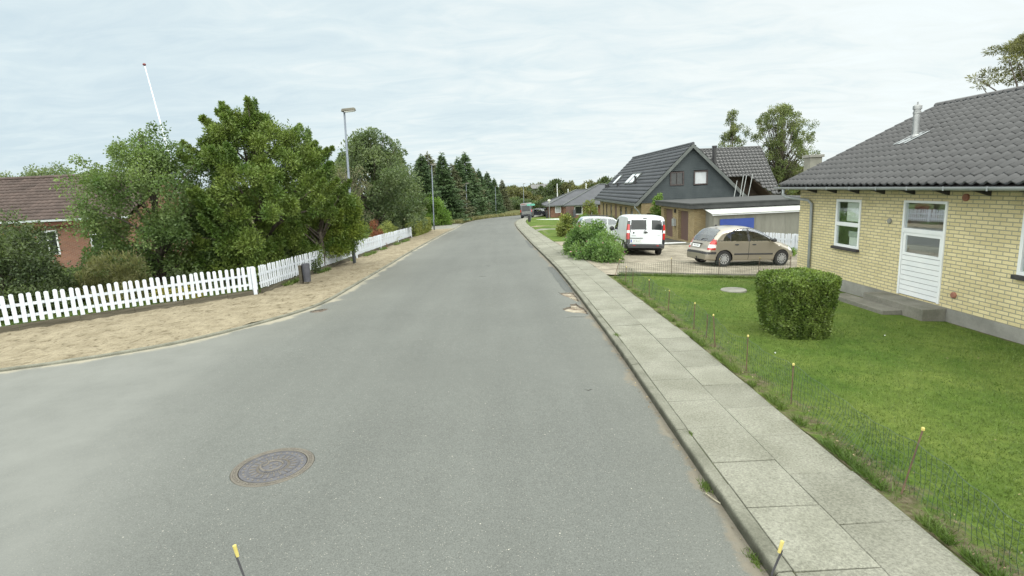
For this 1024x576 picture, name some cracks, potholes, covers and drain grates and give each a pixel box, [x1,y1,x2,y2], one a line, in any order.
manhole cover [230,448,315,487]
pothole [563,303,588,314]
